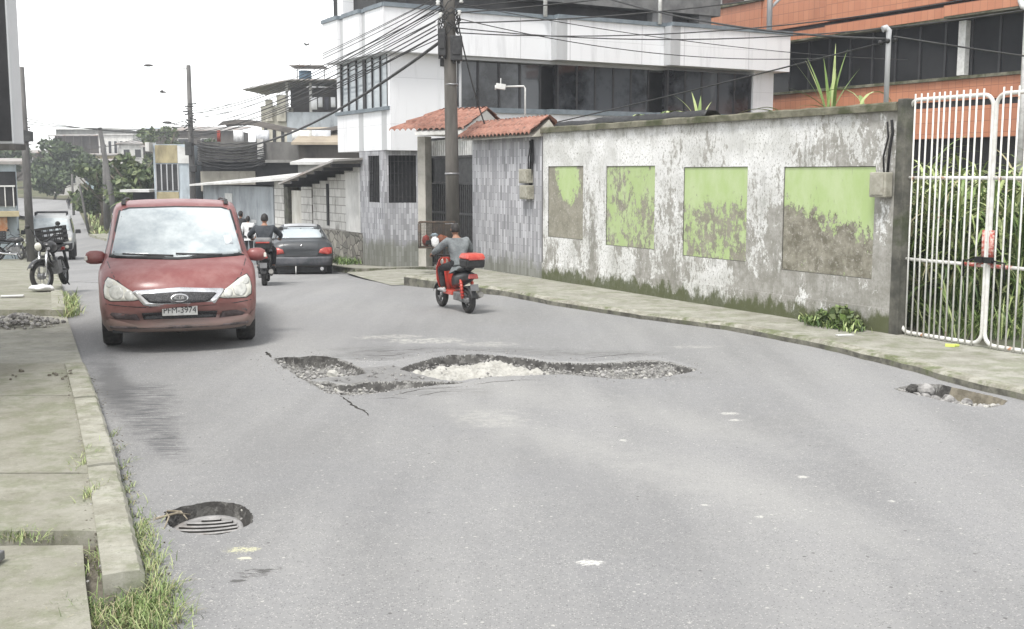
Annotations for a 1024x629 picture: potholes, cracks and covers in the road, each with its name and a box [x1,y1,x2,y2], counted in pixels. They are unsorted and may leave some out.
pothole [250,349,704,399]
drain grate [173,515,243,535]
pothole [895,383,1007,407]
